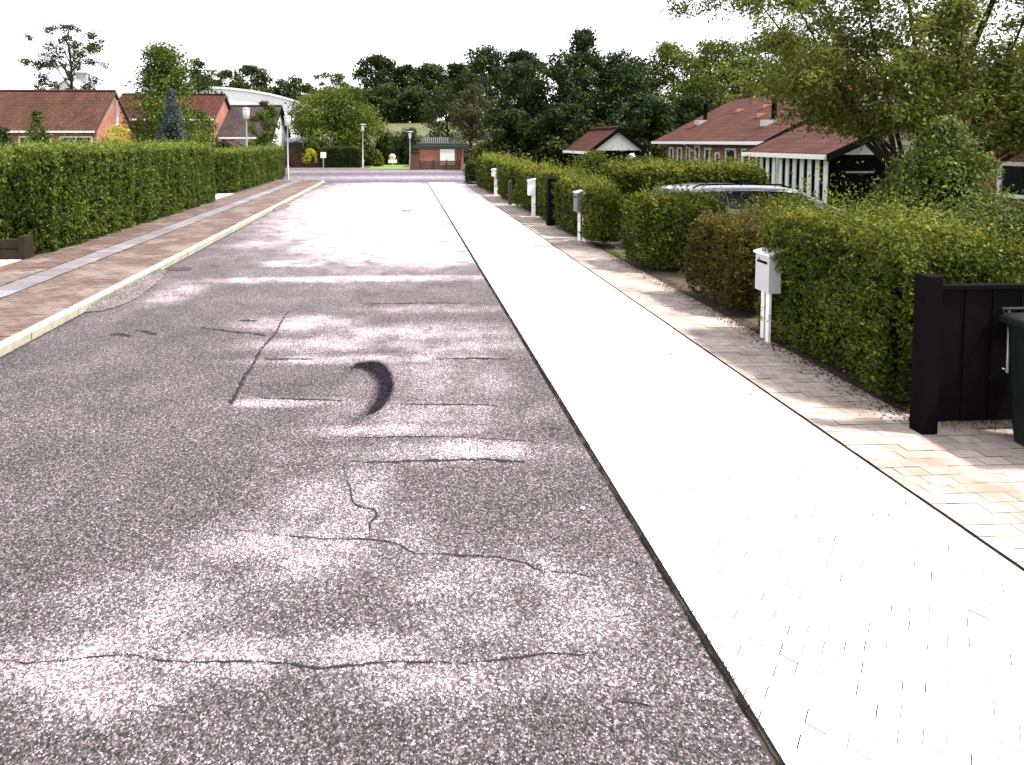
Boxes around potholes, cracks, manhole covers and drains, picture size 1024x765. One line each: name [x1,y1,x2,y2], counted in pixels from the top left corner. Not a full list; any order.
crack [0,650,597,672]
crack [201,312,315,405]
crack [220,427,596,577]
pothole [340,359,397,428]
